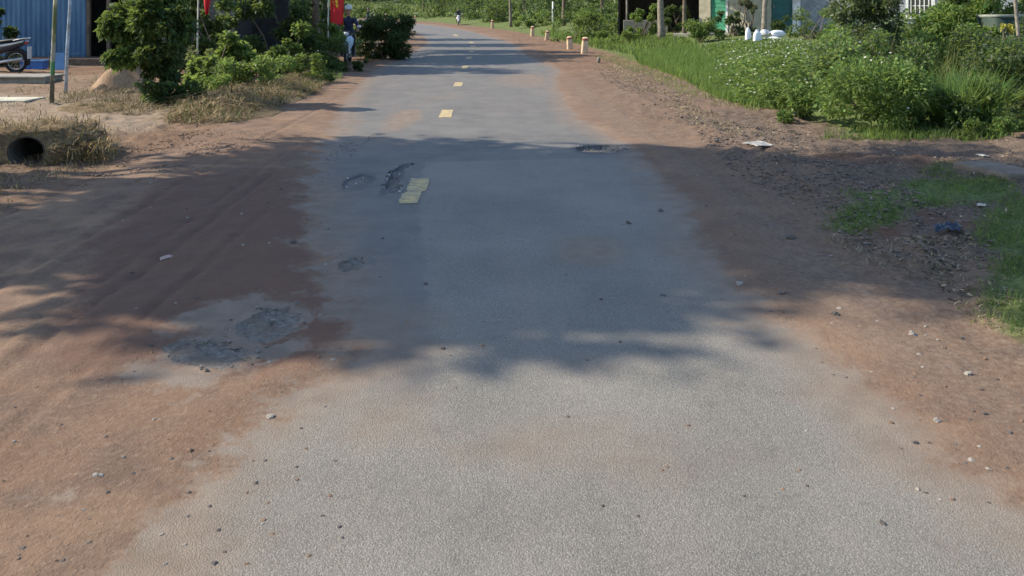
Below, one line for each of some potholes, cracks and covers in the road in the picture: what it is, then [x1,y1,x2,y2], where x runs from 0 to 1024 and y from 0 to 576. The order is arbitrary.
pothole [337,173,376,190]
pothole [153,336,267,375]
pothole [568,144,634,154]
pothole [382,162,413,195]
pothole [328,254,377,276]
pothole [223,302,314,349]
